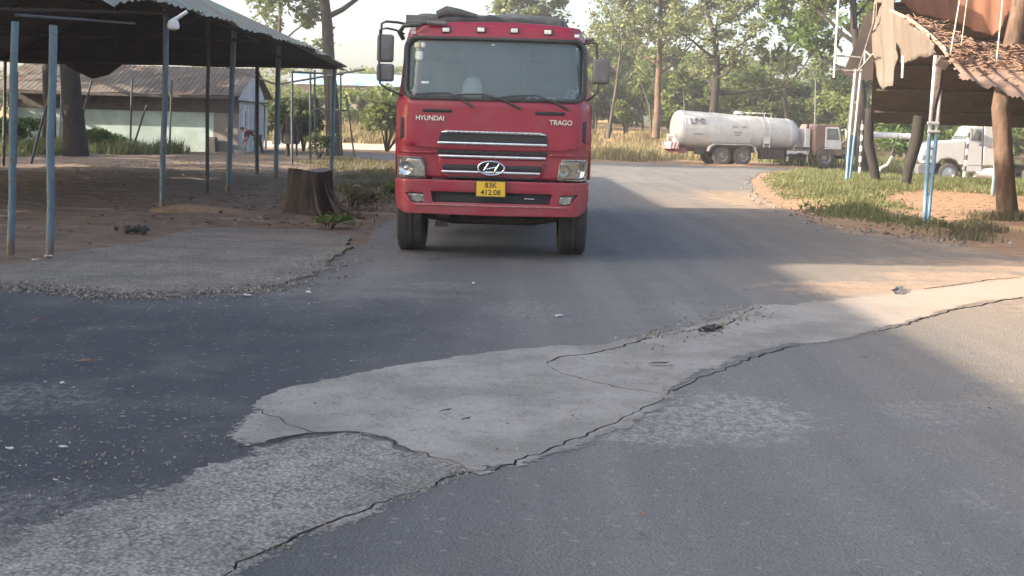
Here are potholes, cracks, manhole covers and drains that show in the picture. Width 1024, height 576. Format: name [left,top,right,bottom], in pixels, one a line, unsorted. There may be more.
crack [224,306,799,576]
crack [878,277,1022,331]
